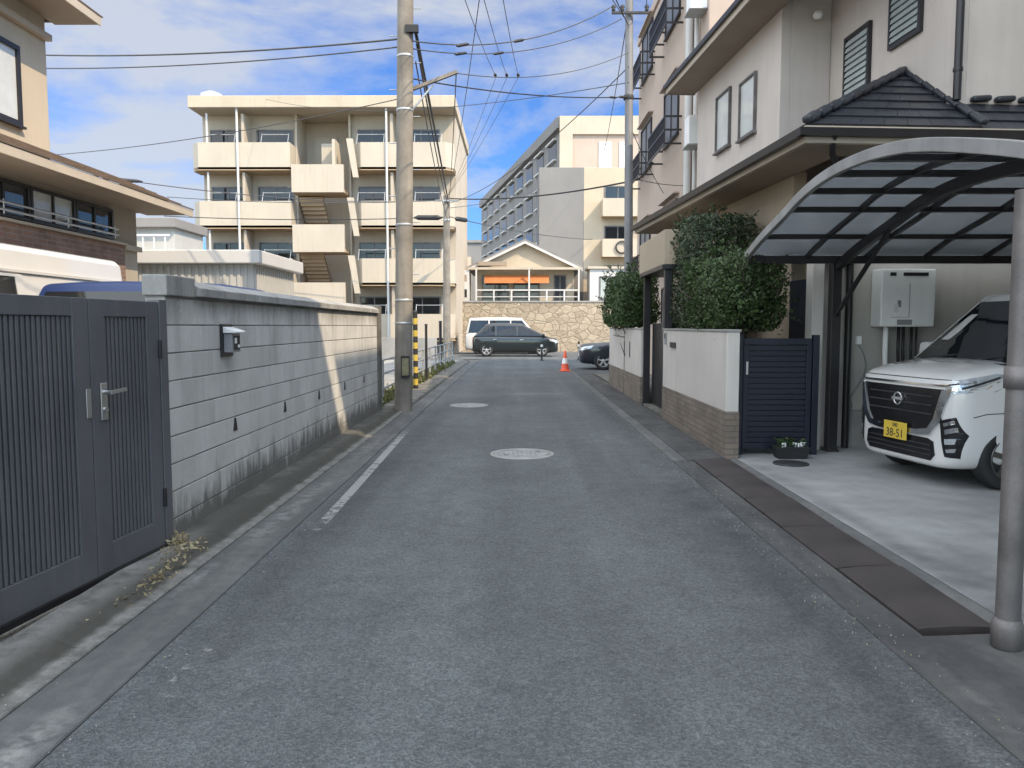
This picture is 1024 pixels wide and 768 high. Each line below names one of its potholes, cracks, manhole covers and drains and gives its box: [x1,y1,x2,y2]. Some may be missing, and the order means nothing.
manhole cover [490,448,554,459]
